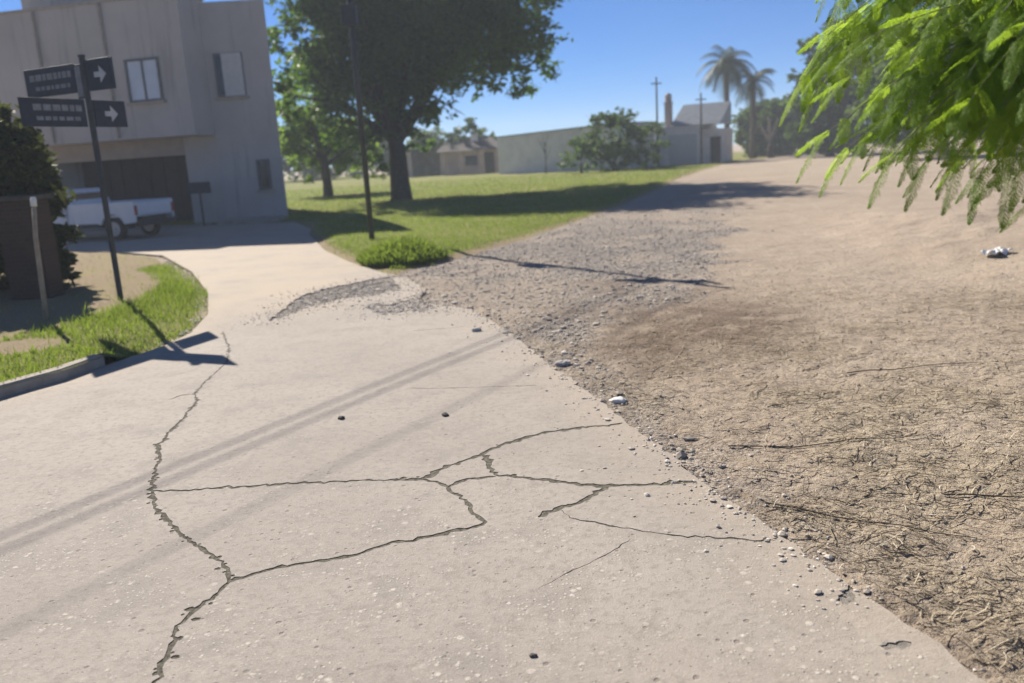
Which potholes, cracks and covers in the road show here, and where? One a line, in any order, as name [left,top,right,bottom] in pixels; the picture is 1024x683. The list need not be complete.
pothole [269,277,402,321]
pothole [879,641,912,650]
crack [146,332,775,683]
